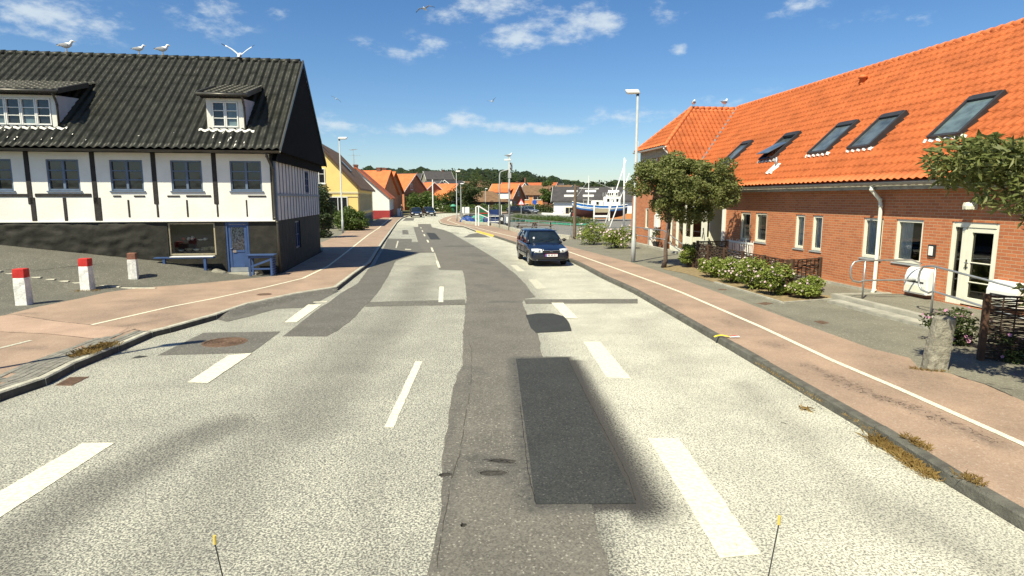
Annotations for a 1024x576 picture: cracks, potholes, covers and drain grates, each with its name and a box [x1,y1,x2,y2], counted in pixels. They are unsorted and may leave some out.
manhole cover [201,337,248,347]
crack [799,365,999,446]
